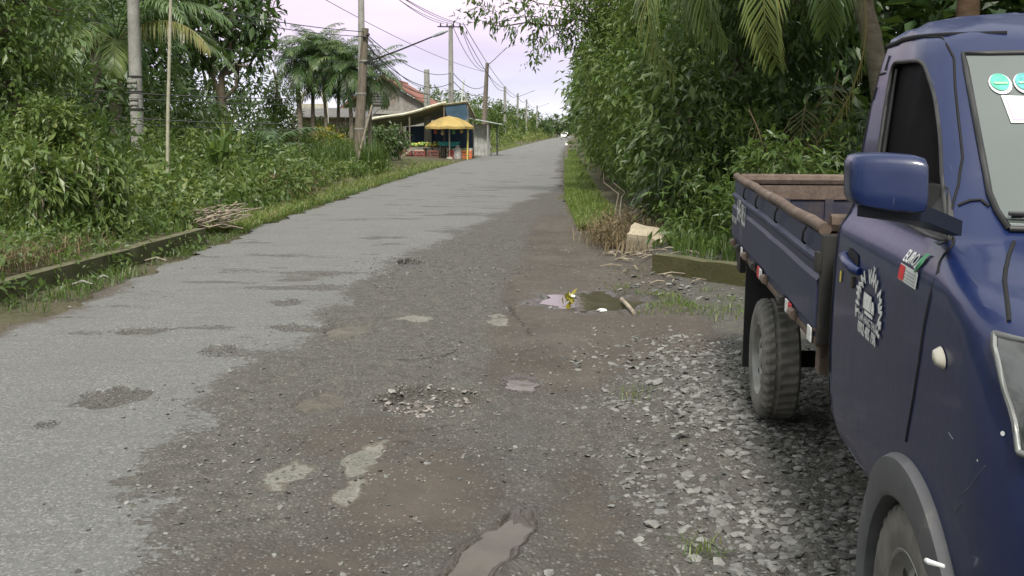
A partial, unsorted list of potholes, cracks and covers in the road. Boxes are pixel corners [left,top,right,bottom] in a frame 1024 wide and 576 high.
pothole [264,296,309,307]
pothole [366,384,495,424]
crack [508,306,532,336]
pothole [441,507,538,576]
pothole [61,383,163,411]
pothole [395,257,425,268]
pothole [193,343,244,356]
pothole [530,291,673,313]
pothole [261,321,333,334]
pothole [32,419,61,430]
pothole [102,325,189,336]
